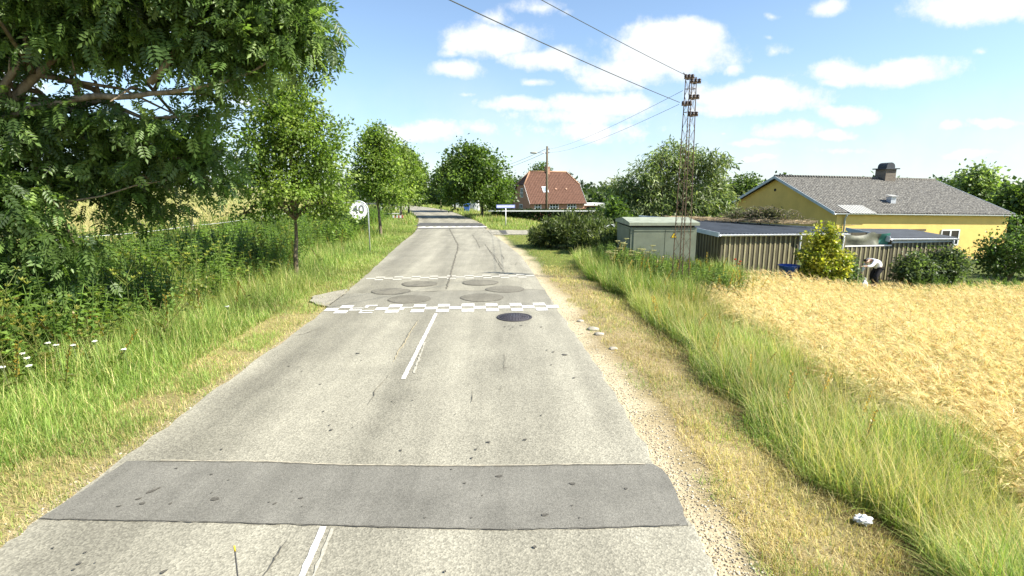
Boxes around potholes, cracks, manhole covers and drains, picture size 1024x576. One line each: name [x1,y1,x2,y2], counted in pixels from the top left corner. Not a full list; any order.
manhole cover [497,313,532,322]
